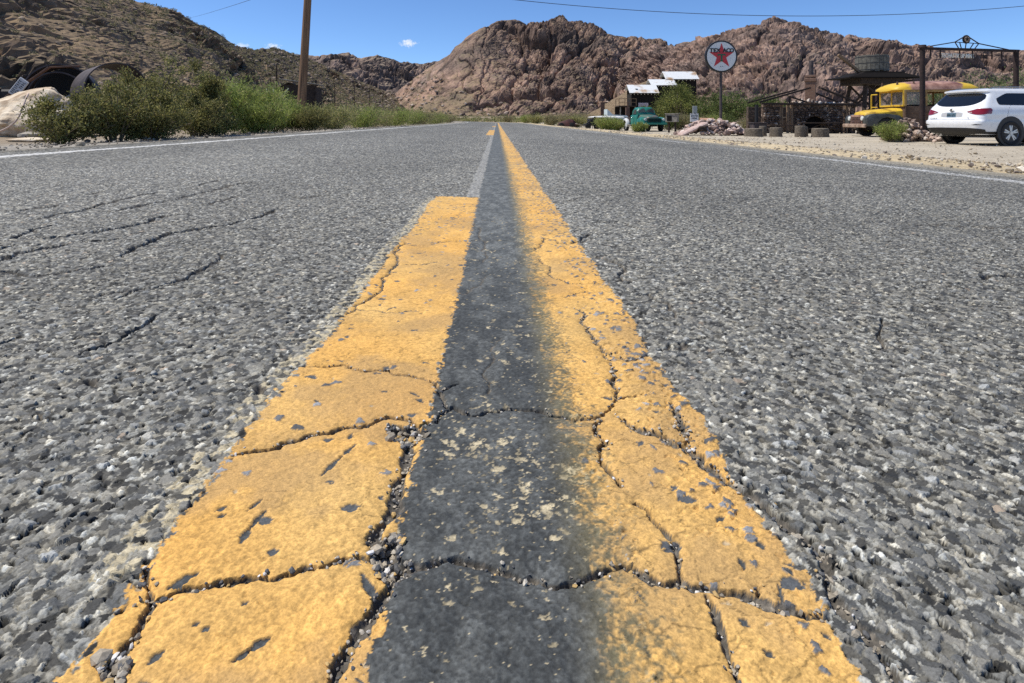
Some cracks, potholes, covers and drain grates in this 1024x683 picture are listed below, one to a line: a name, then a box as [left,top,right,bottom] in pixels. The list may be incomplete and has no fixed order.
crack [118,221,834,683]
crack [0,180,324,277]
crack [80,314,159,356]
crack [99,253,225,300]
crack [875,318,889,350]
